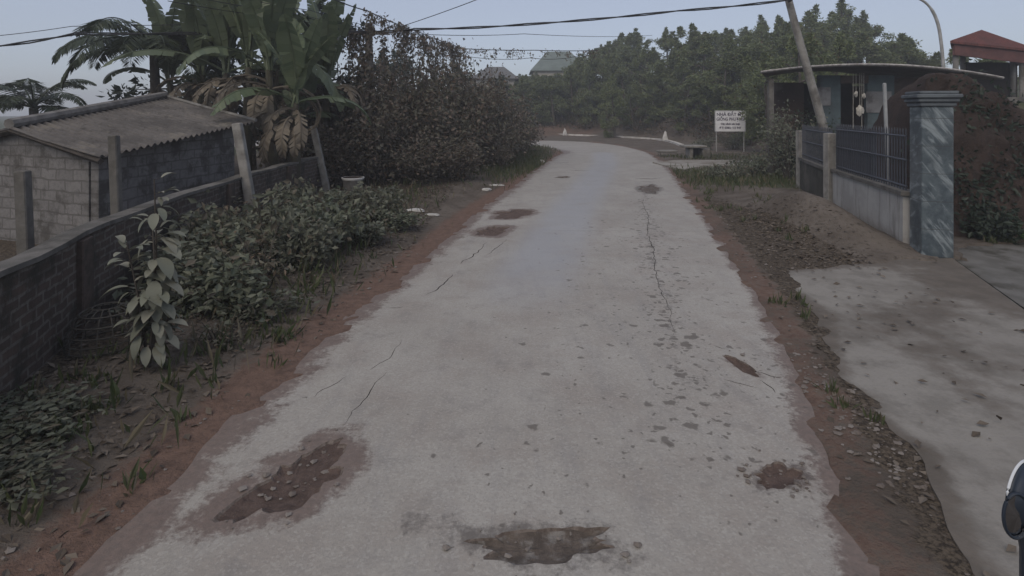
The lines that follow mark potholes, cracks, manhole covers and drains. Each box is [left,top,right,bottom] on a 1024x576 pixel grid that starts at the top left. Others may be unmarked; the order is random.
pothole [638,184,659,194]
crack [319,340,402,425]
pothole [212,437,347,523]
pothole [494,209,535,219]
pothole [476,226,509,236]
pothole [463,526,615,565]
pothole [754,461,804,489]
